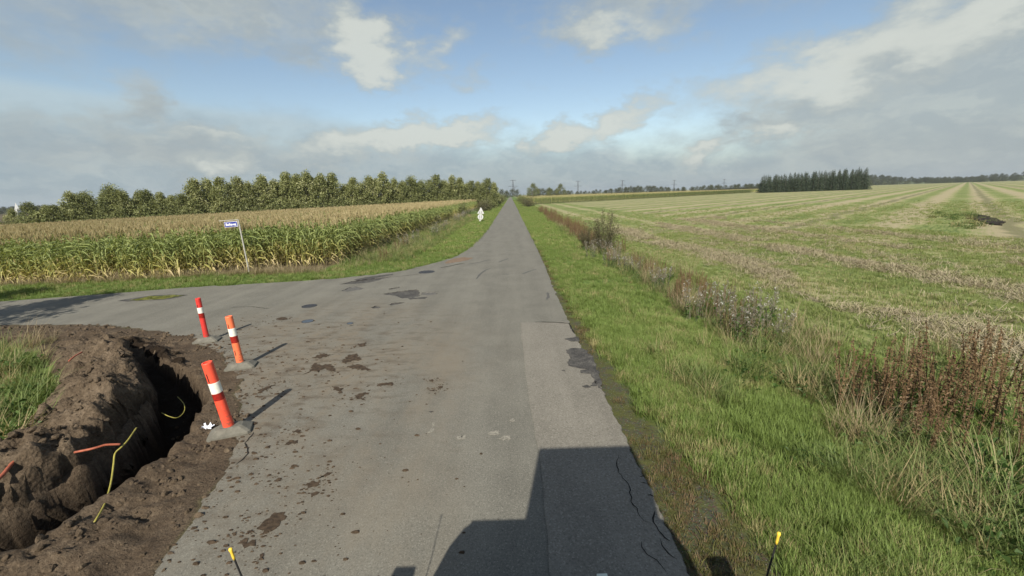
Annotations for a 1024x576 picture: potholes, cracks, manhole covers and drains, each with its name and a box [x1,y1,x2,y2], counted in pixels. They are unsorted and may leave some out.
crack [616,456,675,571]
